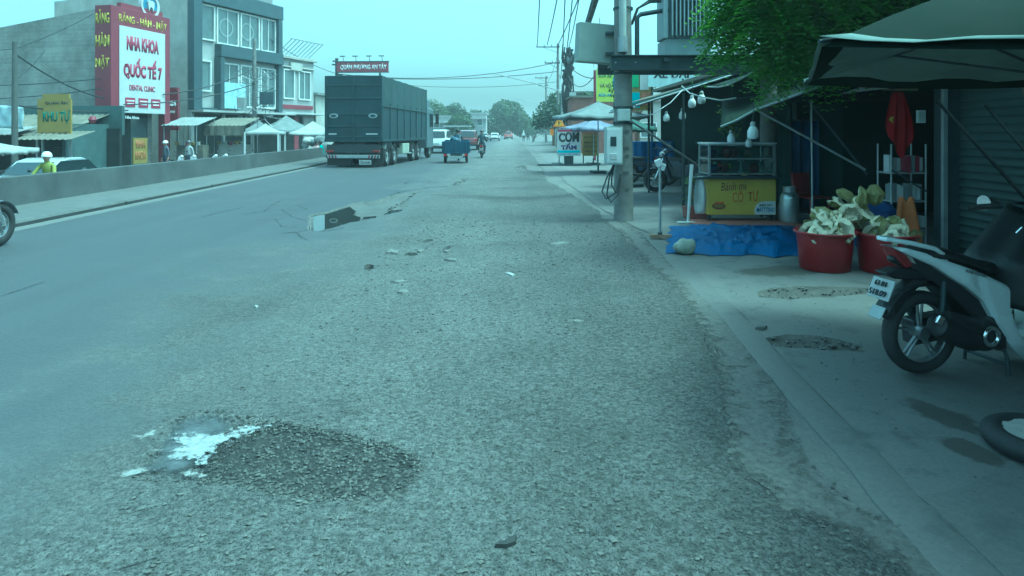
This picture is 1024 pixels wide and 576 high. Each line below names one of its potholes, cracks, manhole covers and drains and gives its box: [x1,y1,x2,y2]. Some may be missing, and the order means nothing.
pothole [306,189,422,231]
pothole [113,407,423,502]
pothole [766,334,870,352]
crack [203,198,344,240]
pothole [758,286,868,300]
